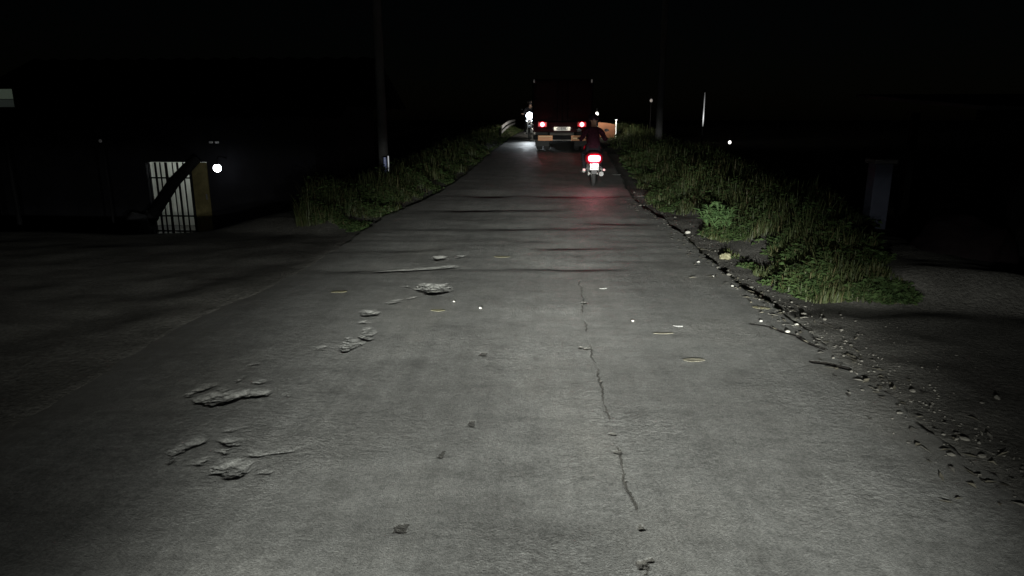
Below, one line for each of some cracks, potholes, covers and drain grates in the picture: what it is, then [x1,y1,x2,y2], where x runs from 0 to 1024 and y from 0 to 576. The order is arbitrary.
crack [744,321,863,375]
crack [573,280,671,576]
